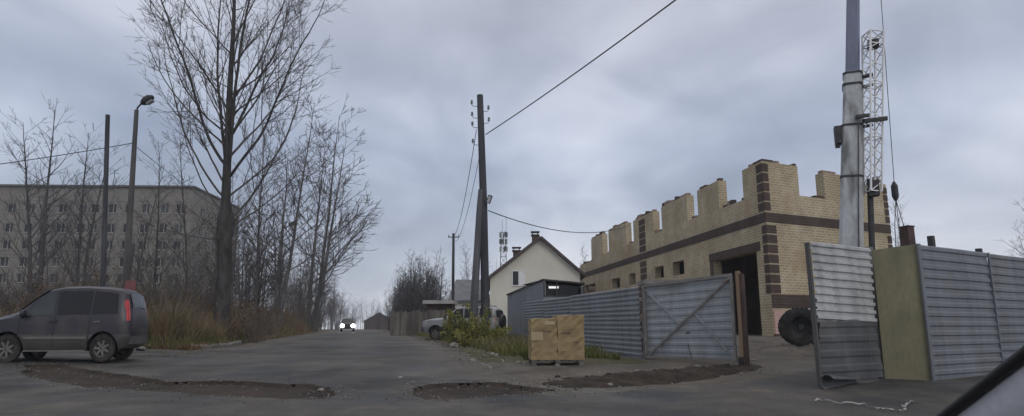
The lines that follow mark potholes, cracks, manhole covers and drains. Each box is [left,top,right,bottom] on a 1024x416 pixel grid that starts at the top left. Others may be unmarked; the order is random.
pothole [20,363,336,399]
pothole [413,382,551,400]
